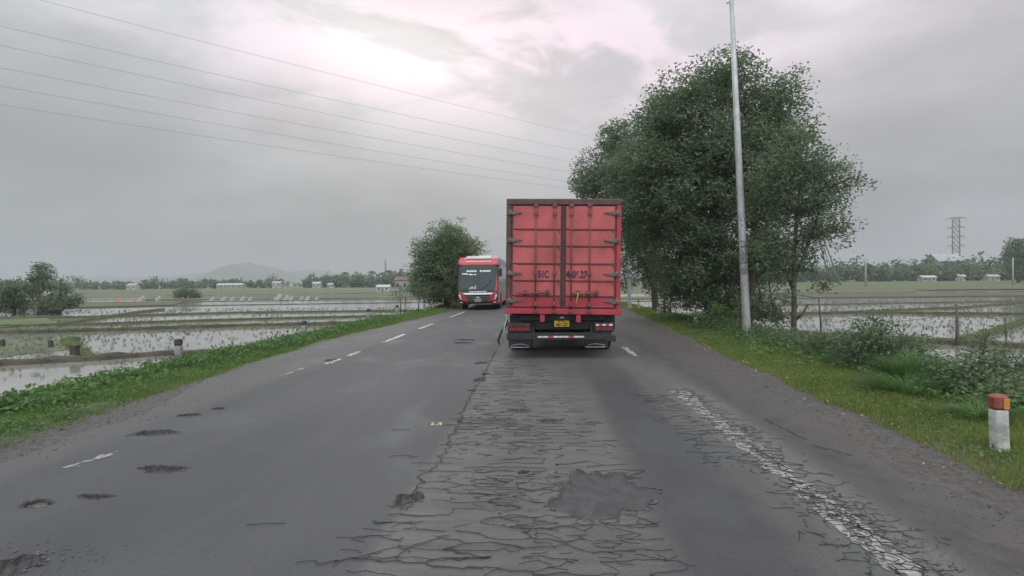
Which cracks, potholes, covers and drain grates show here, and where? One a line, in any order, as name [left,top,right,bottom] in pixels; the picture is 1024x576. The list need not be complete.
crack [646,388,991,576]
pothole [136,464,191,473]
pothole [0,552,48,576]
crack [296,350,695,576]
pothole [17,498,58,508]
pothole [390,491,425,510]
